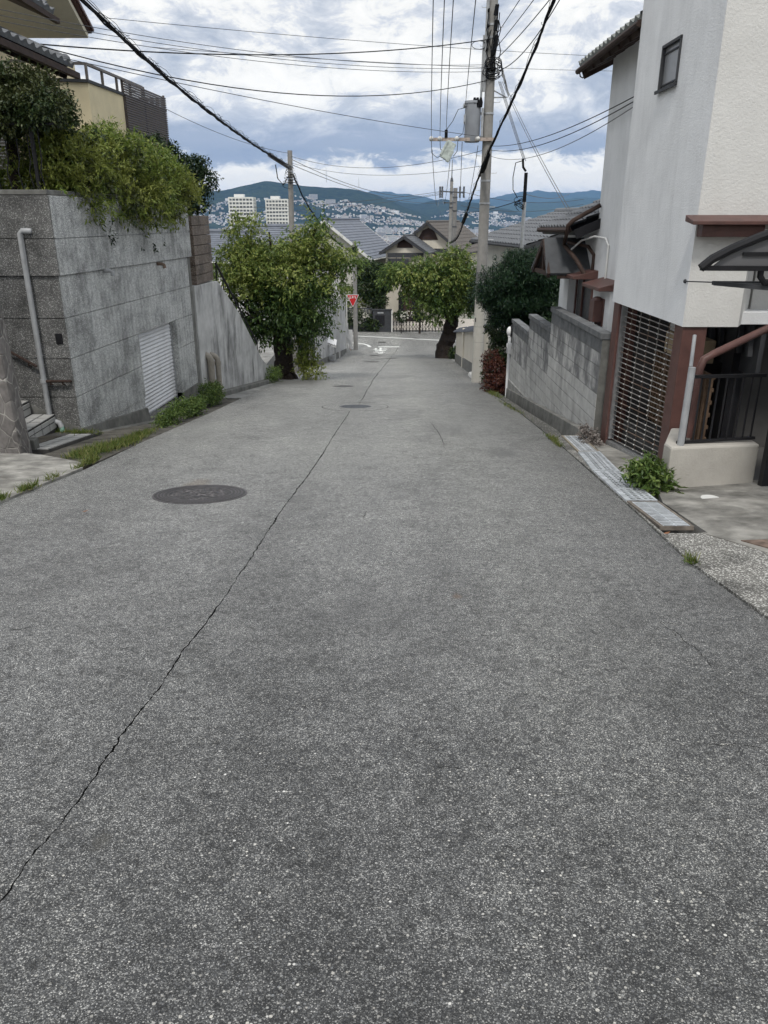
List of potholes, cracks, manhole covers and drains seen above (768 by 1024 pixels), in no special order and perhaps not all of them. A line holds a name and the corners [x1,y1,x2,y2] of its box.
drain grate [627,501,694,533]
manhole cover [152,485,247,504]
drain grate [594,471,641,499]
drain grate [613,488,658,510]
drain grate [561,435,599,456]
crack [0,348,398,902]
drain grate [578,451,619,480]
